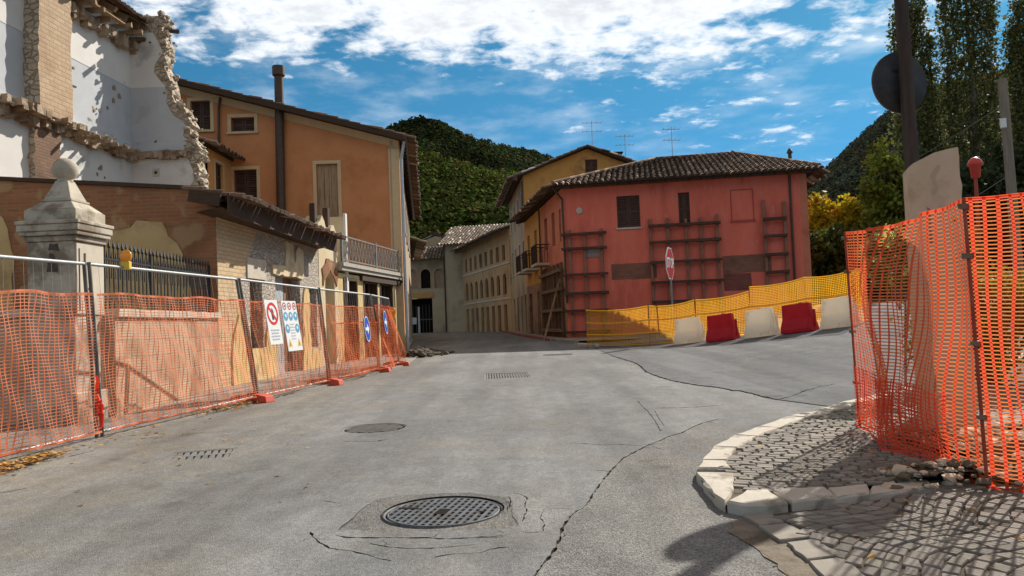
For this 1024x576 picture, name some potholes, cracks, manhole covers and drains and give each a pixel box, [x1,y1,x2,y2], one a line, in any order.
manhole cover [341,424,407,433]
drain grate [164,448,238,462]
crack [502,405,719,574]
manhole cover [382,498,508,529]
crack [309,532,506,561]
